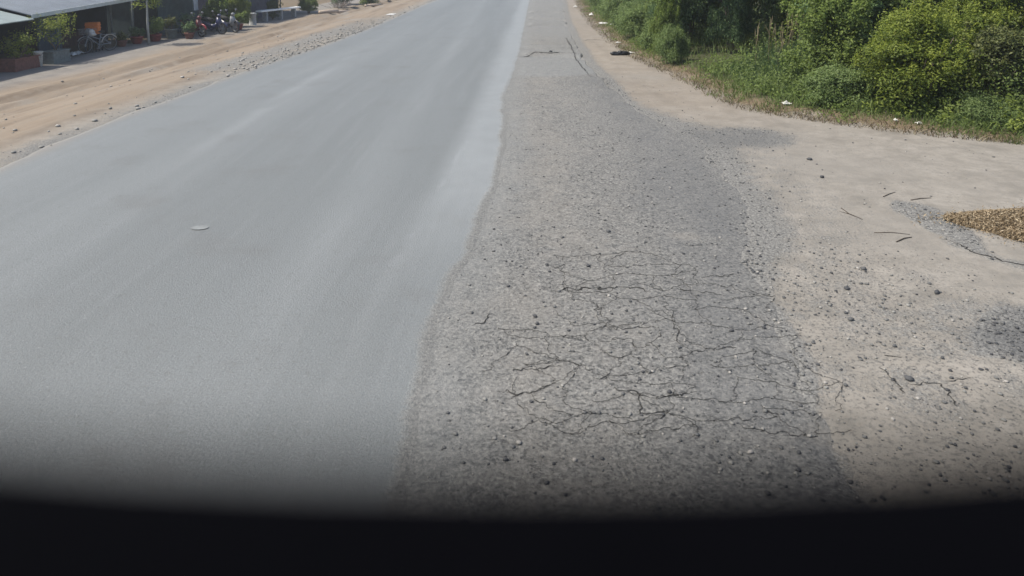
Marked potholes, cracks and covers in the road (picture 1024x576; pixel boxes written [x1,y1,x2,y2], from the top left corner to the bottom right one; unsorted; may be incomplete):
crack [524,39,597,74]
crack [879,355,971,406]
crack [484,251,849,437]
